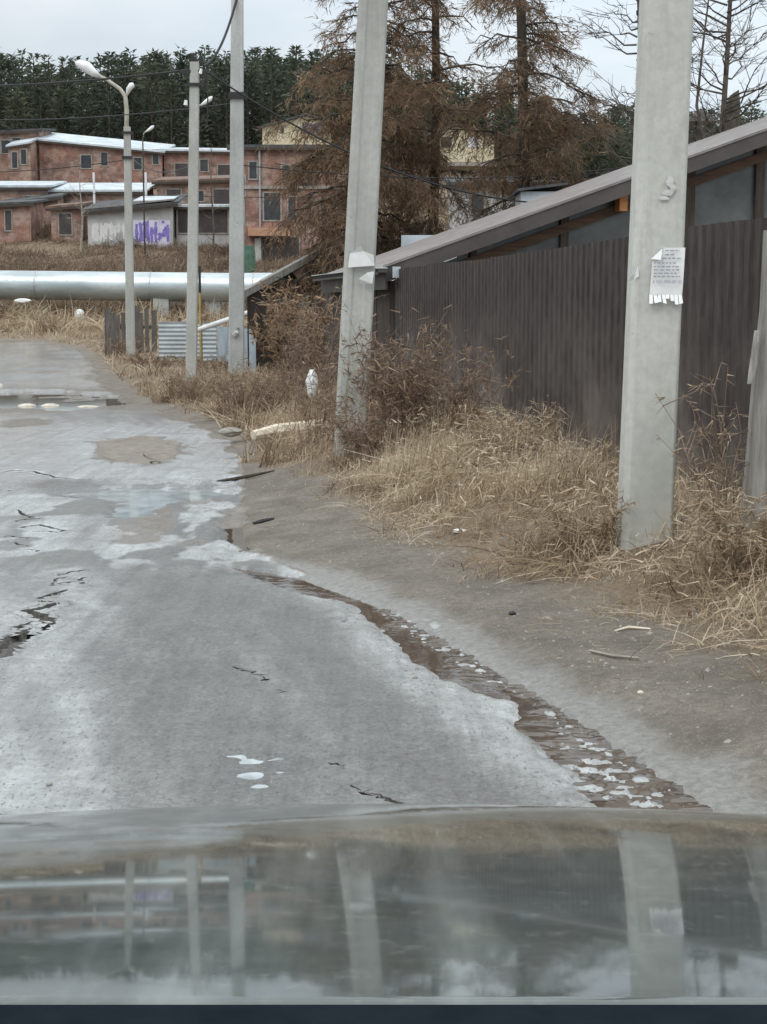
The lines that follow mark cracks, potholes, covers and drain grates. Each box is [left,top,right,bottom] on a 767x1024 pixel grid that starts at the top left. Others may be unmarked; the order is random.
crack [6,509,67,551]
crack [322,762,410,804]
crack [227,666,287,693]
crack [0,570,90,662]
